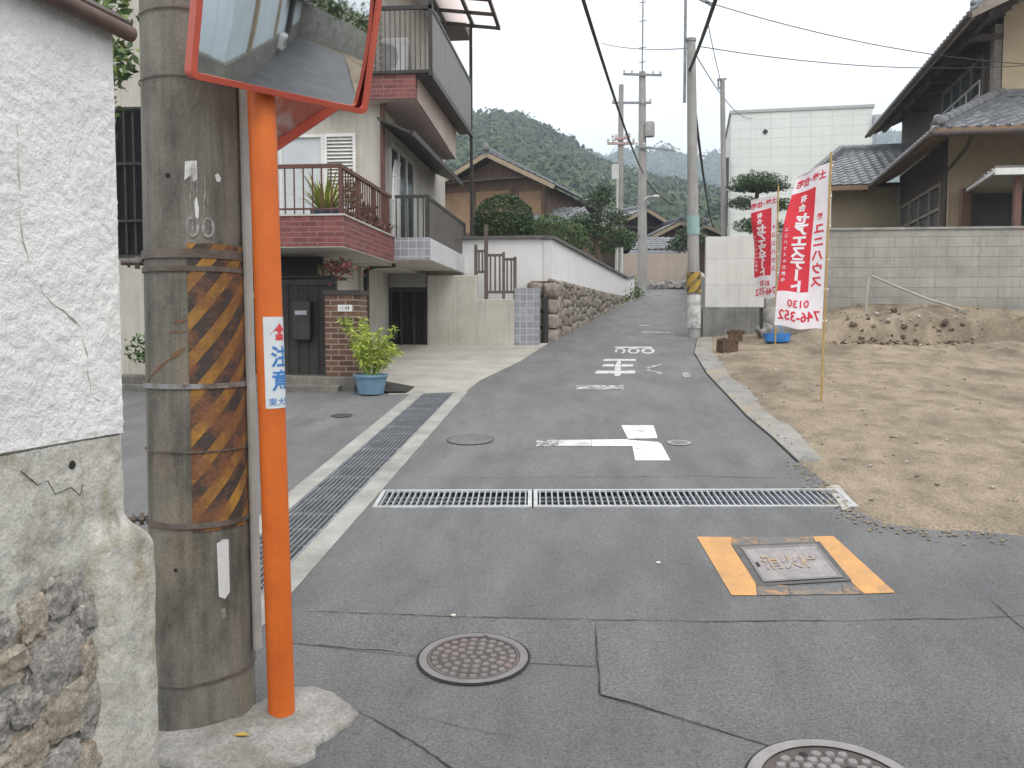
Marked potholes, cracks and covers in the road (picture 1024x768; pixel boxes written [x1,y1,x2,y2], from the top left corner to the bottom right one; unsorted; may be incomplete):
utility cover [732,541,851,586]
manhole cover [745,739,906,768]
manhole cover [447,434,494,445]
drain grate [329,447,401,477]
drain grate [387,408,439,427]
drain grate [372,489,532,508]
drain grate [361,425,422,449]
manhole cover [416,633,530,685]
drain grate [289,475,374,514]
drain grate [259,512,339,565]
drain grate [534,488,859,508]
drain grate [407,393,454,409]
